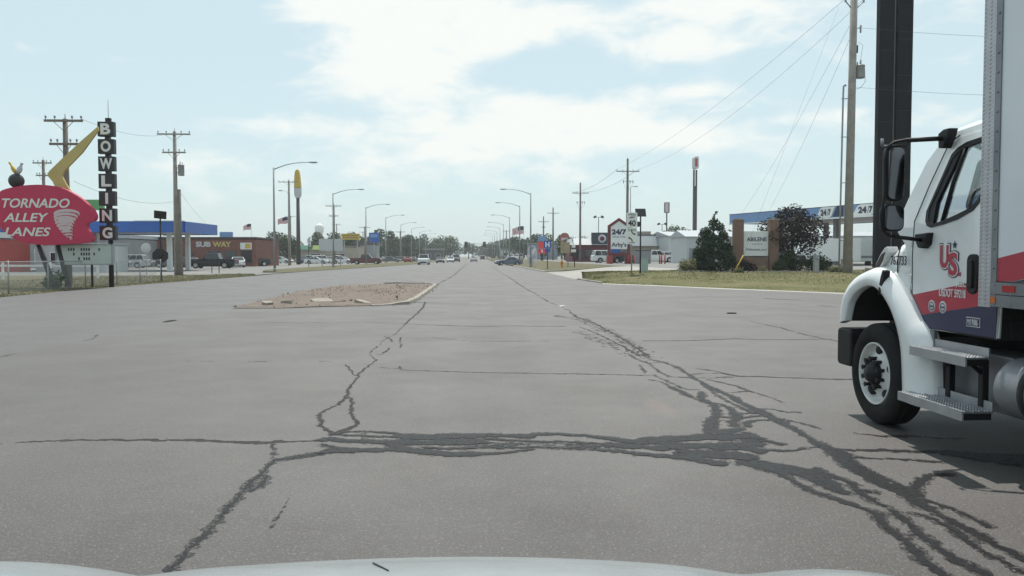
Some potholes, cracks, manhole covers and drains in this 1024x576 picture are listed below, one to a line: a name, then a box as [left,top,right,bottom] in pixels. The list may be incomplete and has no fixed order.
crack [266,302,838,376]
